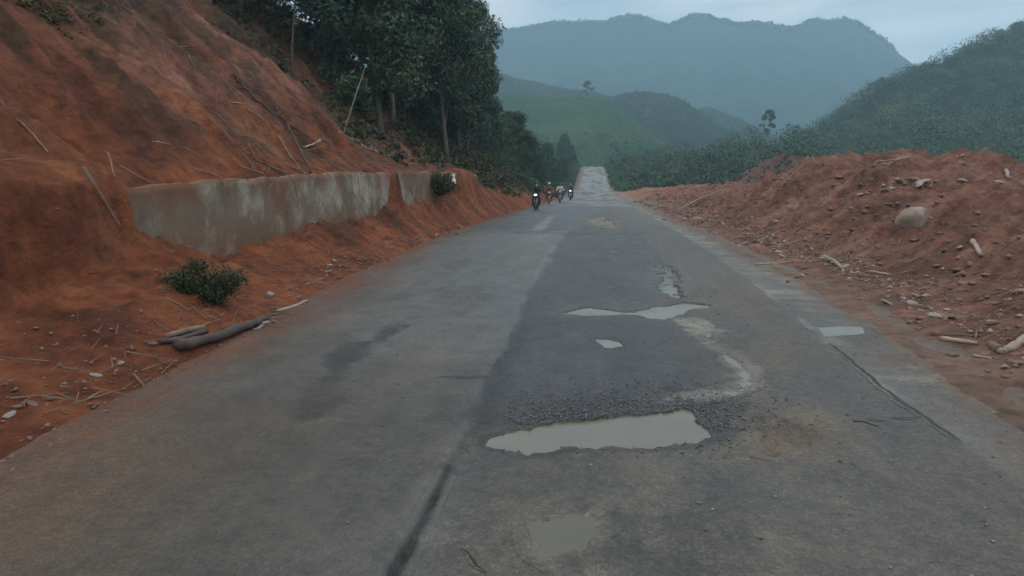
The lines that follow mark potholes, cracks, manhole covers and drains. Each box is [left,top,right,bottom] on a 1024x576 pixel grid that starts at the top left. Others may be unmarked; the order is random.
pothole [480,407,729,459]
pothole [811,325,872,338]
pothole [580,217,623,229]
pothole [647,263,695,300]
pothole [507,500,618,573]
crack [827,343,960,440]
pothole [588,337,632,350]
pothole [556,300,717,321]
